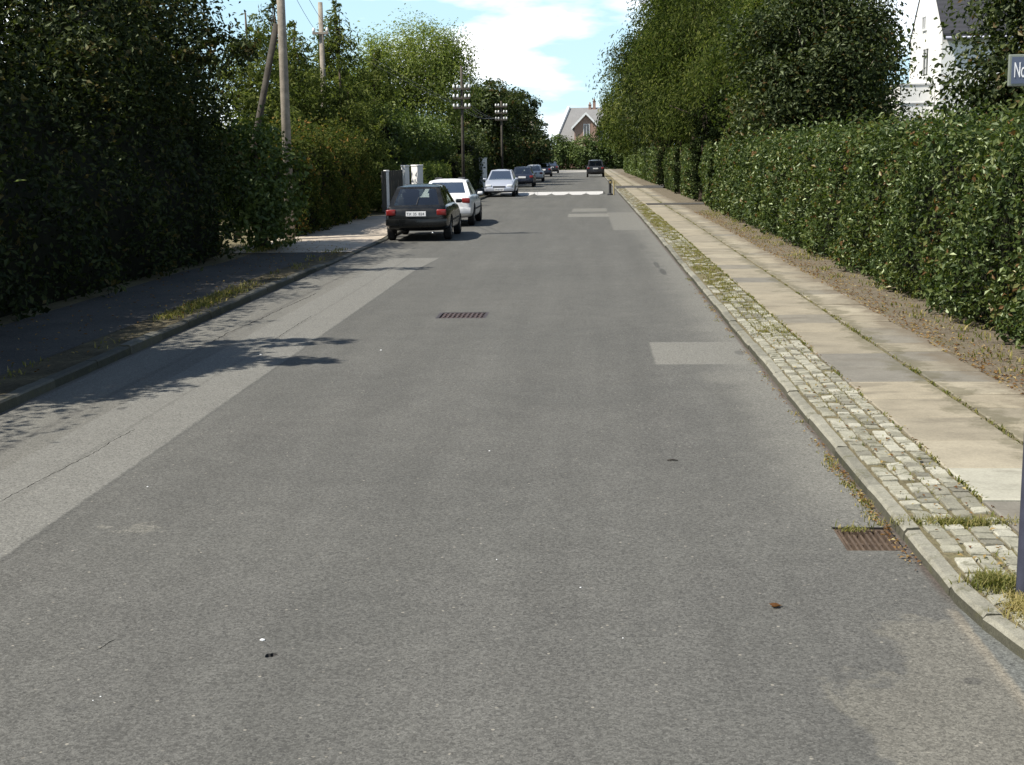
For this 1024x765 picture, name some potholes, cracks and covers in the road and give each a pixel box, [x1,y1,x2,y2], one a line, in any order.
crack [0,429,135,502]
drain grate [832,527,906,551]
